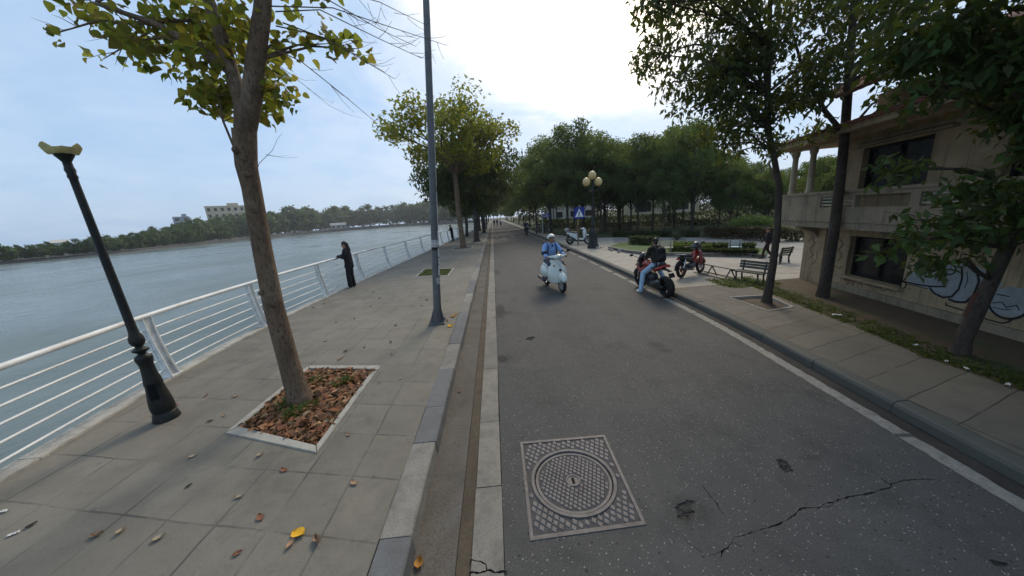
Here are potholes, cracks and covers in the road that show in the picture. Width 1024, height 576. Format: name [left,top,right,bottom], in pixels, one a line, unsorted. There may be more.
pothole [776,458,794,474]
crack [469,559,507,575]
manhole cover [520,435,646,541]
crack [708,478,935,557]
pothole [674,500,695,522]
